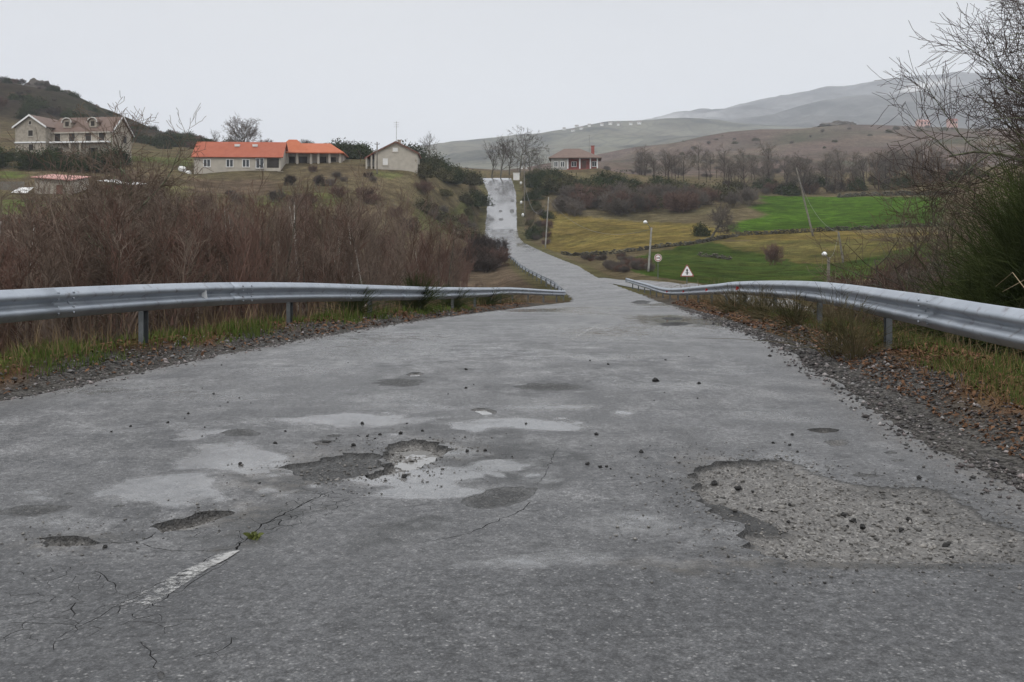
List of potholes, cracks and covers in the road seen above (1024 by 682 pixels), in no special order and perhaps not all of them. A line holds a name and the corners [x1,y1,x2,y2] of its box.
pothole [278,453,385,483]
pothole [372,378,423,387]
pothole [687,459,1024,565]
pothole [461,486,538,509]
crack [4,467,418,669]
pothole [150,510,235,540]
pothole [365,439,454,480]
crack [437,449,558,540]
pothole [43,536,101,547]
